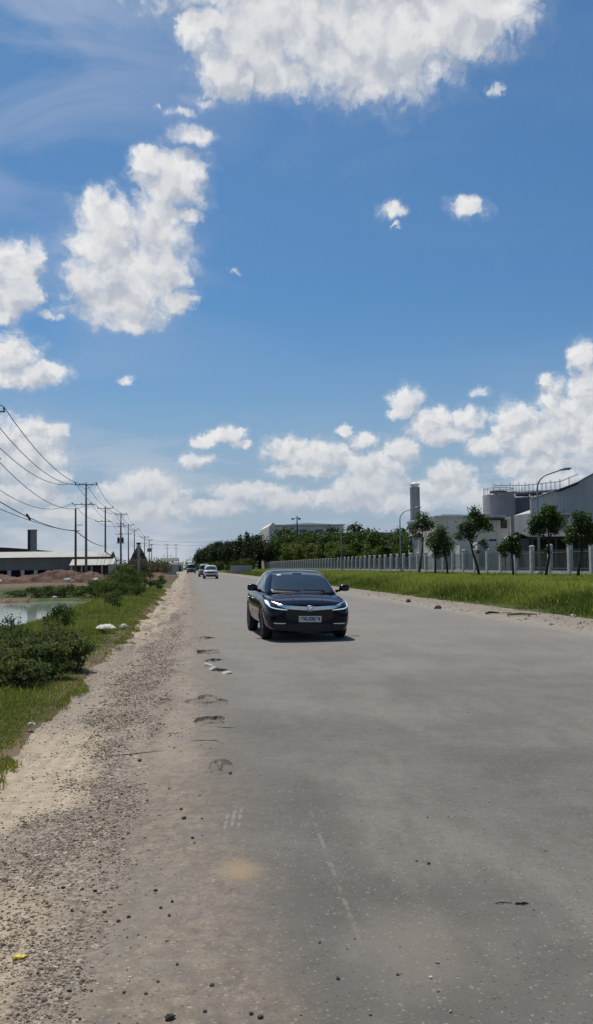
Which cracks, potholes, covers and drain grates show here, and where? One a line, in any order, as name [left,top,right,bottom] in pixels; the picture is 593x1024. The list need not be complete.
pothole [209,759,234,777]
pothole [193,716,225,727]
pothole [184,694,229,708]
